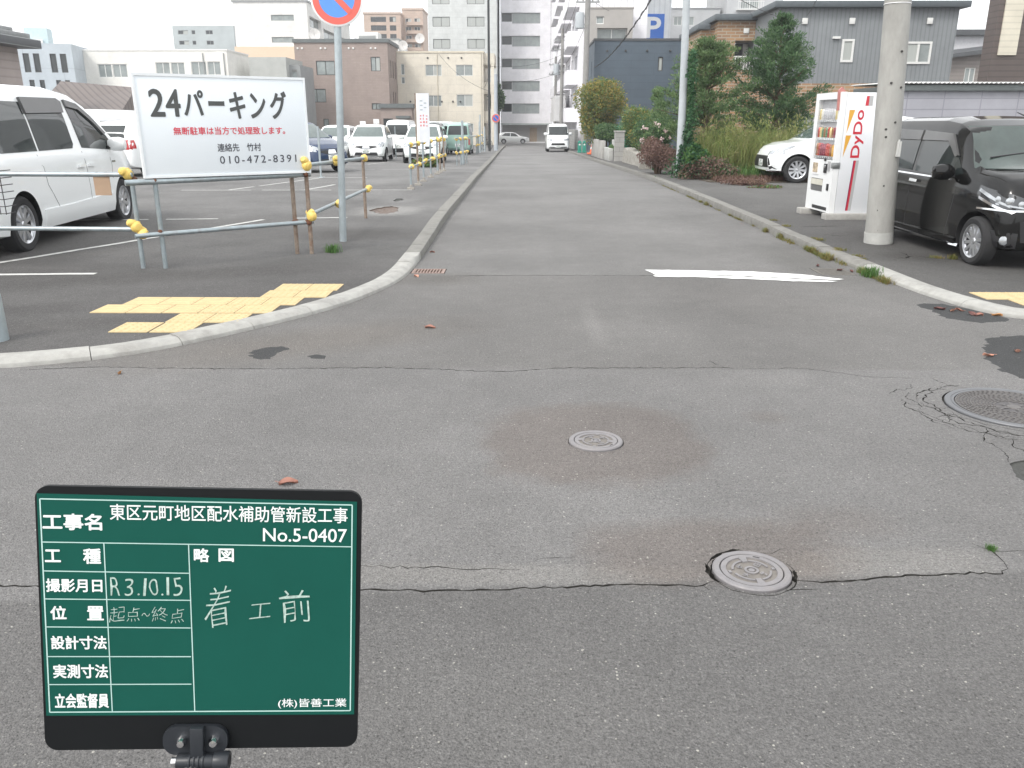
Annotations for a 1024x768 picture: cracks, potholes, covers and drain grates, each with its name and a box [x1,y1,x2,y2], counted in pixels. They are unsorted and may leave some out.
manhole cover [569,430,623,452]
crack [0,543,1019,596]
manhole cover [711,551,792,594]
crack [889,380,1024,458]
manhole cover [944,387,1024,429]
